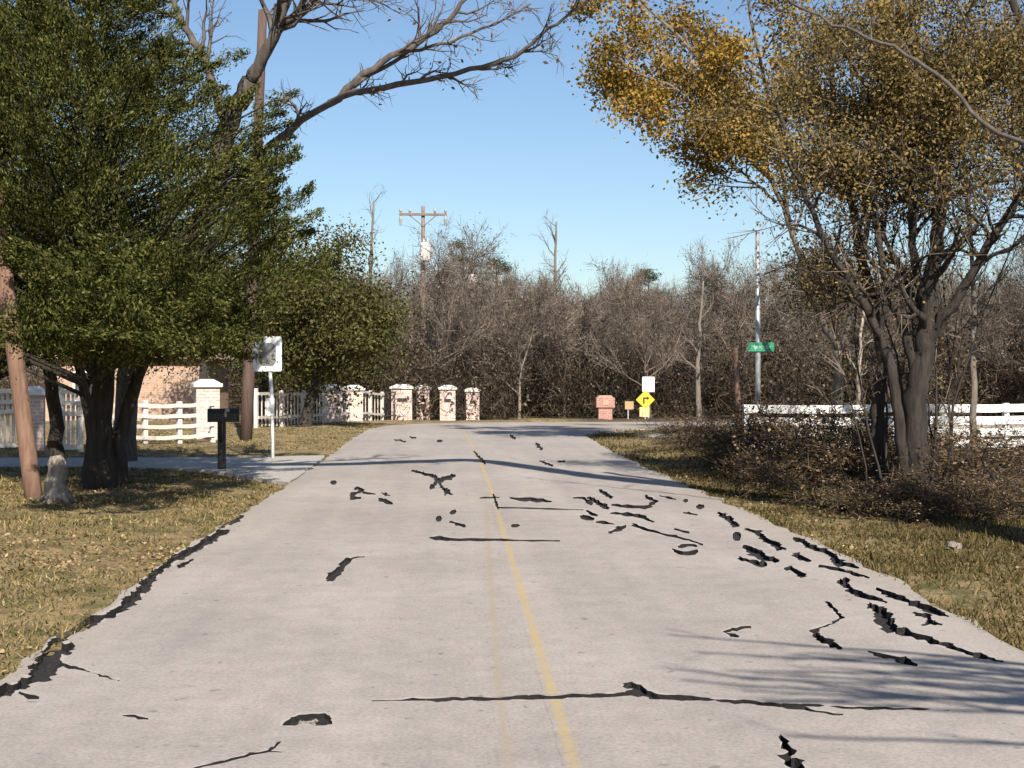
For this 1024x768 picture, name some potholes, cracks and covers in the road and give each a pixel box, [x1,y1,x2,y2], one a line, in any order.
crack [0,515,244,699]
pothole [279,712,335,727]
crack [473,450,486,465]
crack [535,442,566,467]
crack [350,469,456,505]
crack [191,740,282,768]
crack [777,734,809,768]
crack [372,489,1004,716]
